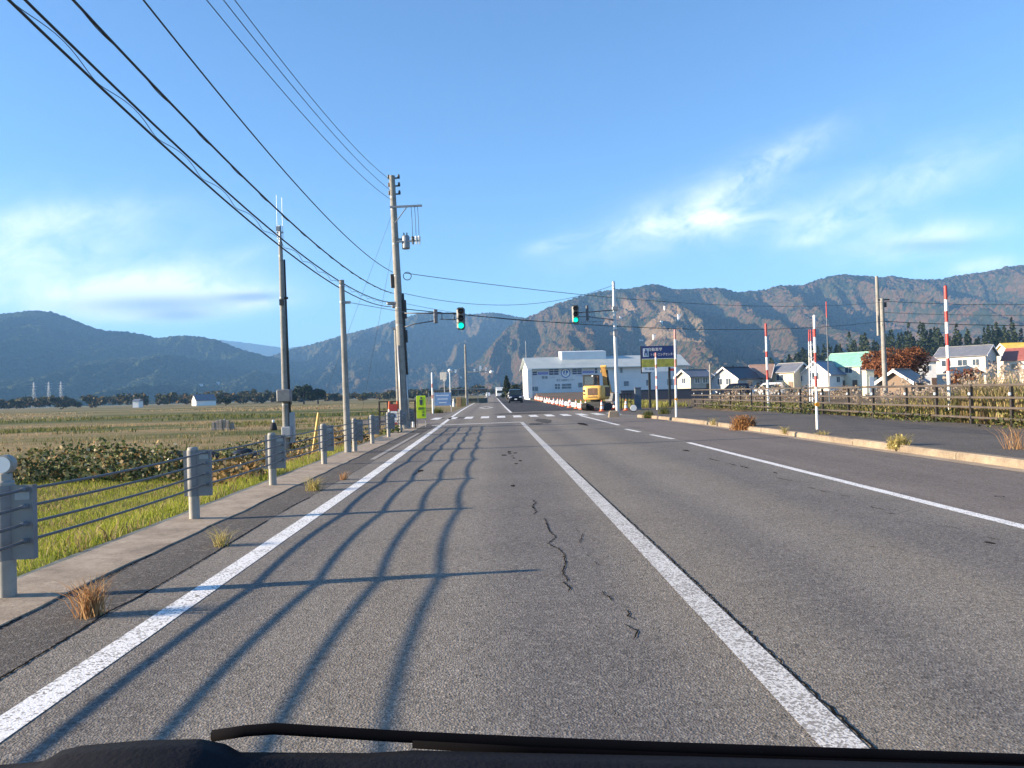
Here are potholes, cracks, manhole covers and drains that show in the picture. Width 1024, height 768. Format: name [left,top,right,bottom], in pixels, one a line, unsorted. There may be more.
crack [532,500,600,592]
crack [602,586,638,638]
